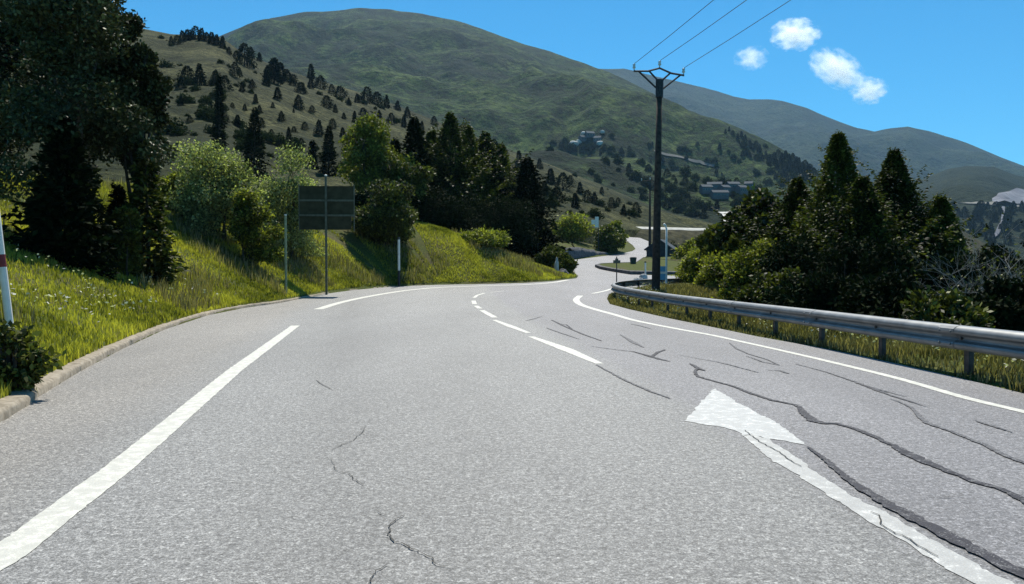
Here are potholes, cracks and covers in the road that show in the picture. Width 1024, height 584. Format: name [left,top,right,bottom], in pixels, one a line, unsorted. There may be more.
crack [366,511,450,567]
crack [871,511,938,556]
